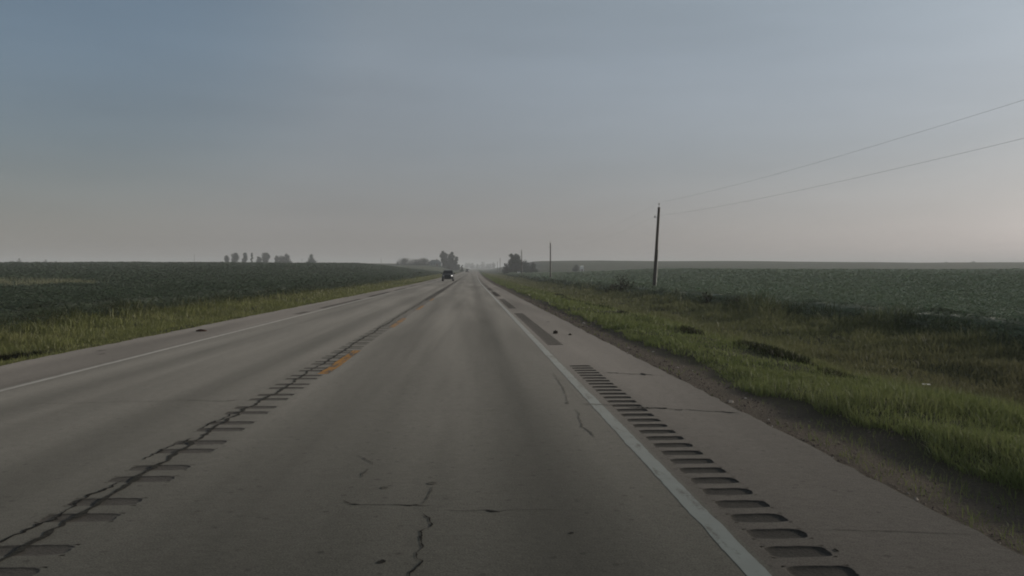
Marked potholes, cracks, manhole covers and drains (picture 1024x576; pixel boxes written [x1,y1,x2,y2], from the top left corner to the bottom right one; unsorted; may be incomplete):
crack [344,486,547,576]
crack [555,375,736,436]
